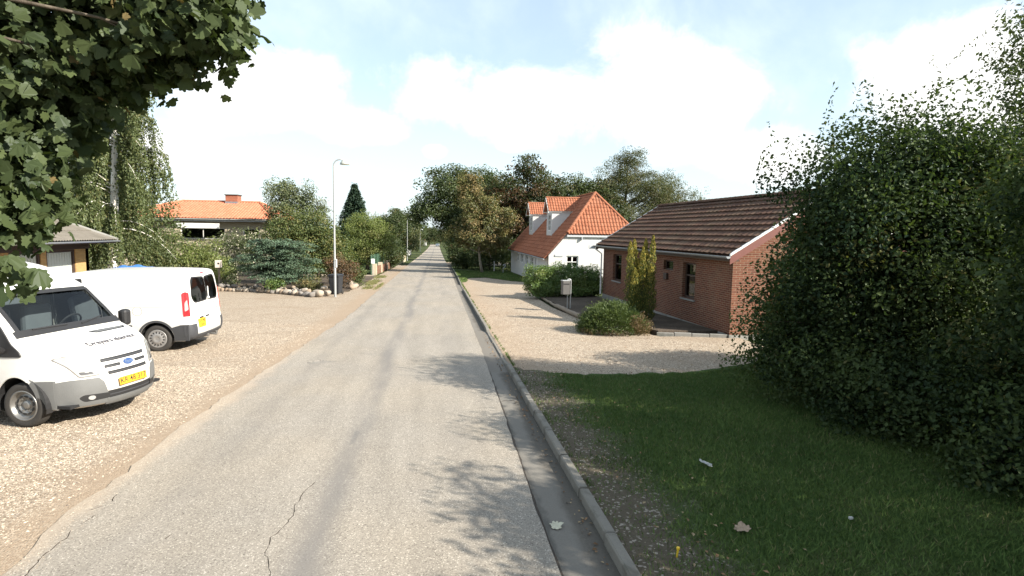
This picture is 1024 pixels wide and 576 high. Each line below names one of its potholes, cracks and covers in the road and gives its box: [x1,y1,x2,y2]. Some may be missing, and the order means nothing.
crack [264,482,315,575]
crack [25,494,117,576]
